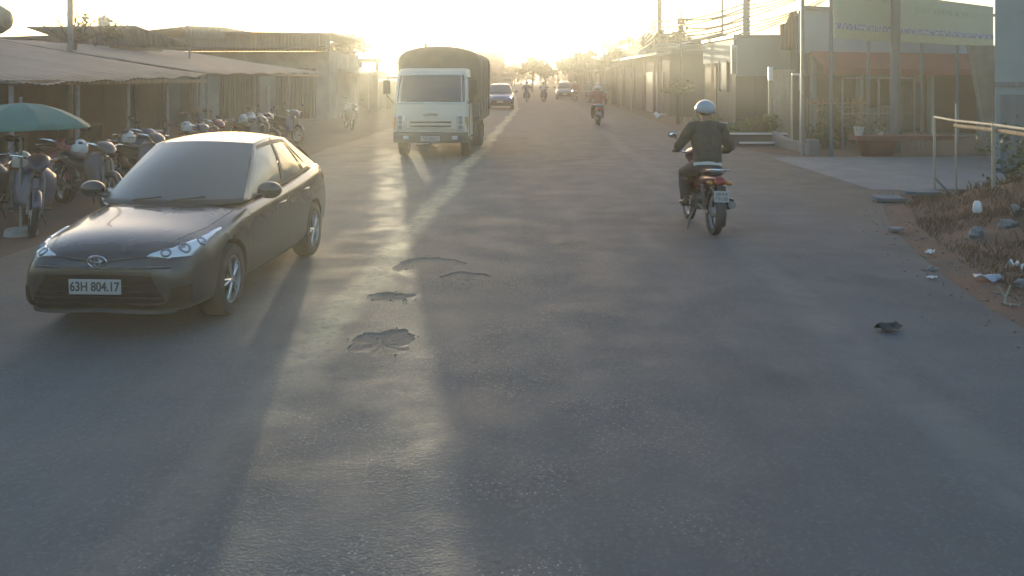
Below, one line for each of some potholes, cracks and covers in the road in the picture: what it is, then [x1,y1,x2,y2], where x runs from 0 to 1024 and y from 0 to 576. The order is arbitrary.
pothole [436,271,491,284]
pothole [347,327,419,358]
pothole [367,291,417,302]
pothole [392,255,466,277]
